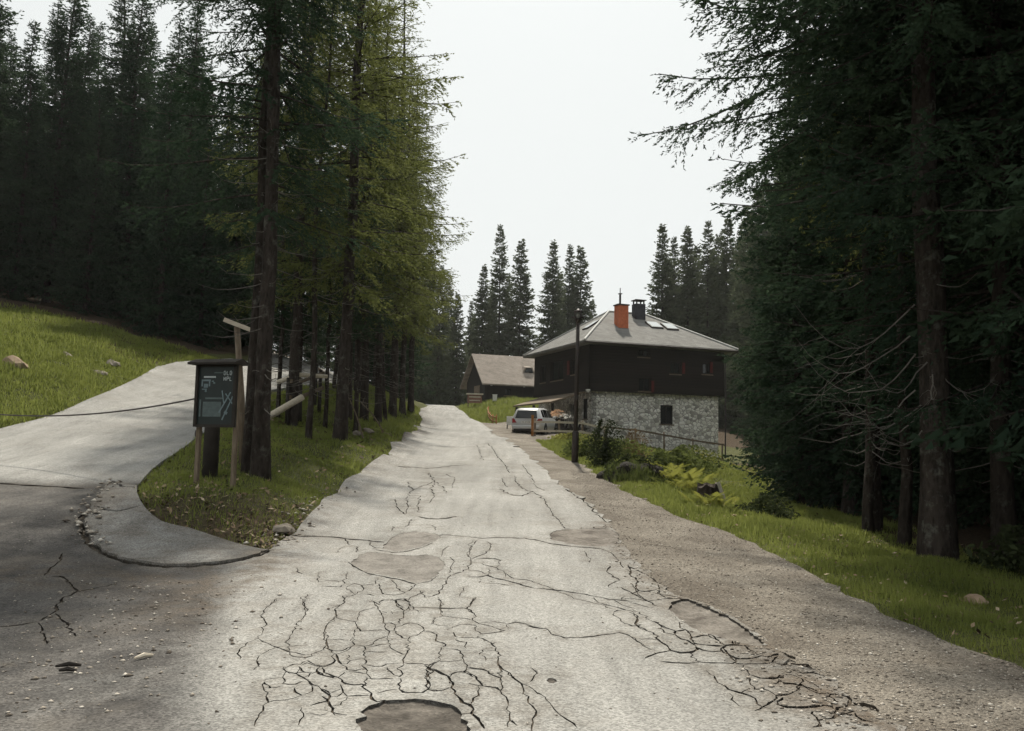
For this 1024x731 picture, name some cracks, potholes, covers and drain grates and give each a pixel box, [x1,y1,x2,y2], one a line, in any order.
crack [292,465,617,563]
crack [484,564,880,727]
crack [1,509,271,644]
crack [237,542,576,731]
pothole [356,699,471,731]
